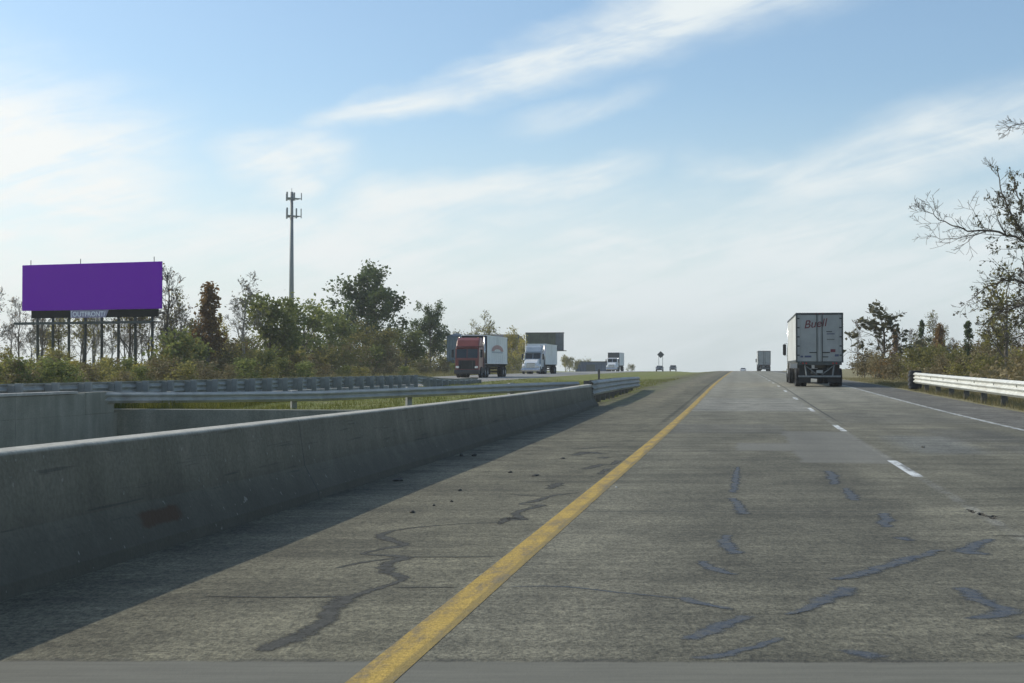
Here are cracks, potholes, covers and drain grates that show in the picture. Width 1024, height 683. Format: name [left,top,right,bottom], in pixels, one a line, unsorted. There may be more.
crack [785,471,1024,639]
